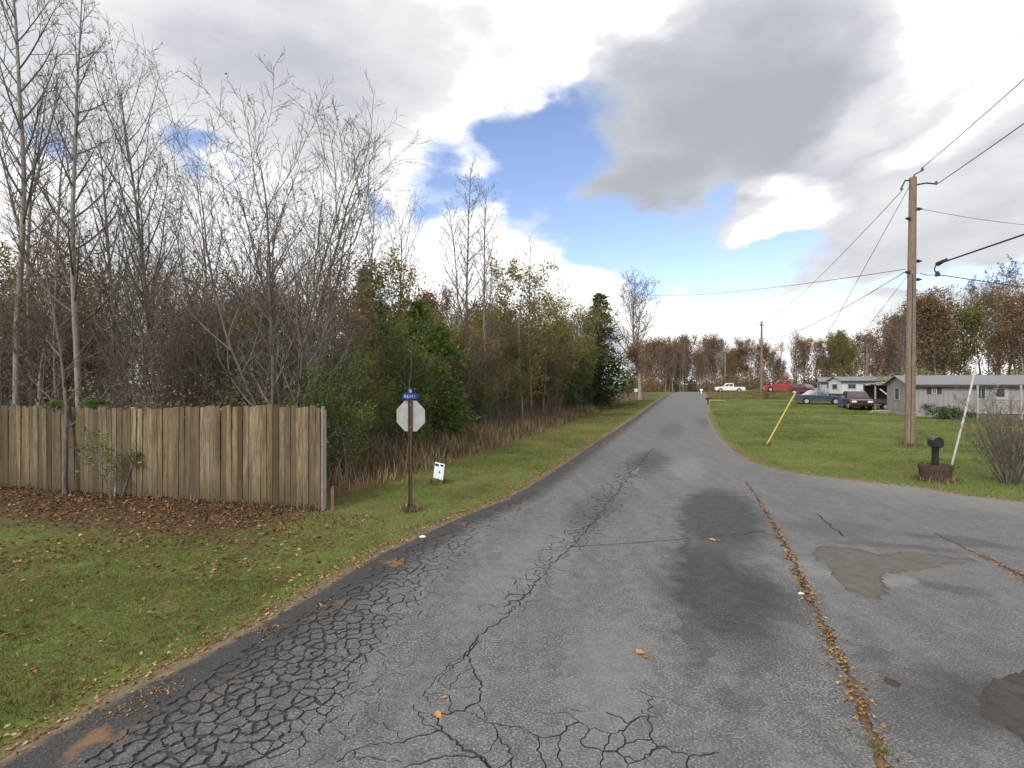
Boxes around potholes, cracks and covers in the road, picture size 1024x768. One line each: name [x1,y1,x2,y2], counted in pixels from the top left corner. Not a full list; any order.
crack [84,448,765,768]
